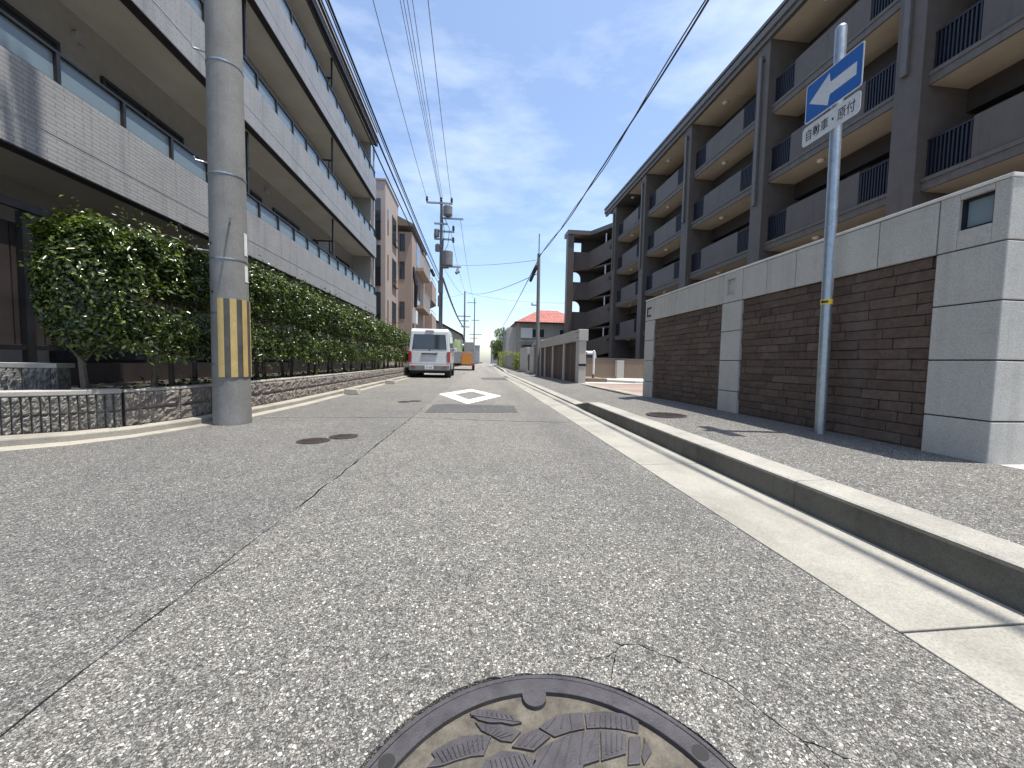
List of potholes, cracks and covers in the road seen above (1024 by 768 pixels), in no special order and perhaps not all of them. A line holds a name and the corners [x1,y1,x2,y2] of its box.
crack [591,629,849,768]
crack [0,410,566,737]
manhole cover [363,675,734,768]
